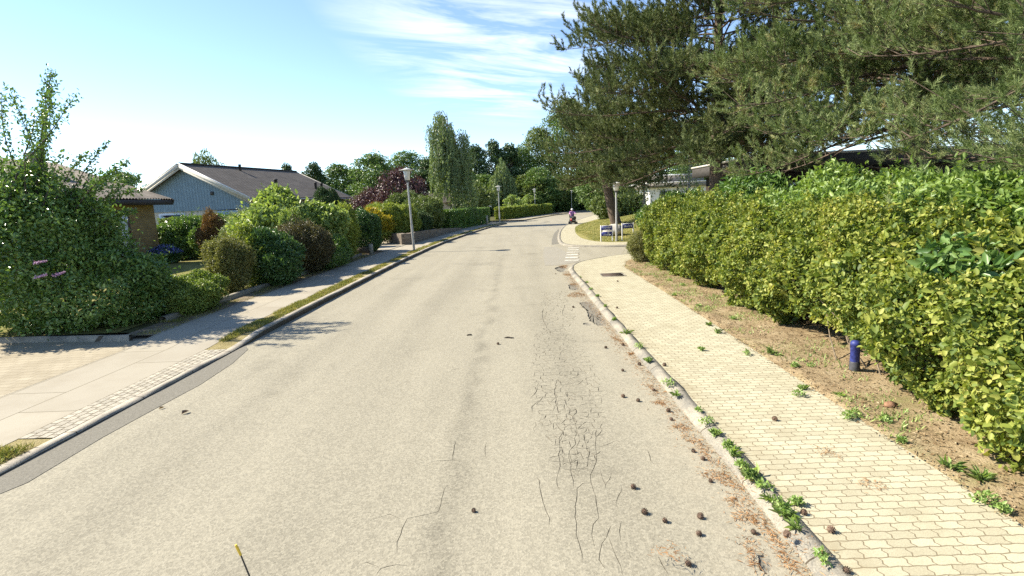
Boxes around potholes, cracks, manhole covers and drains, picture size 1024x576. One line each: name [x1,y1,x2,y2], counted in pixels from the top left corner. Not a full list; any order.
pothole [580,301,607,326]
crack [533,291,630,575]
